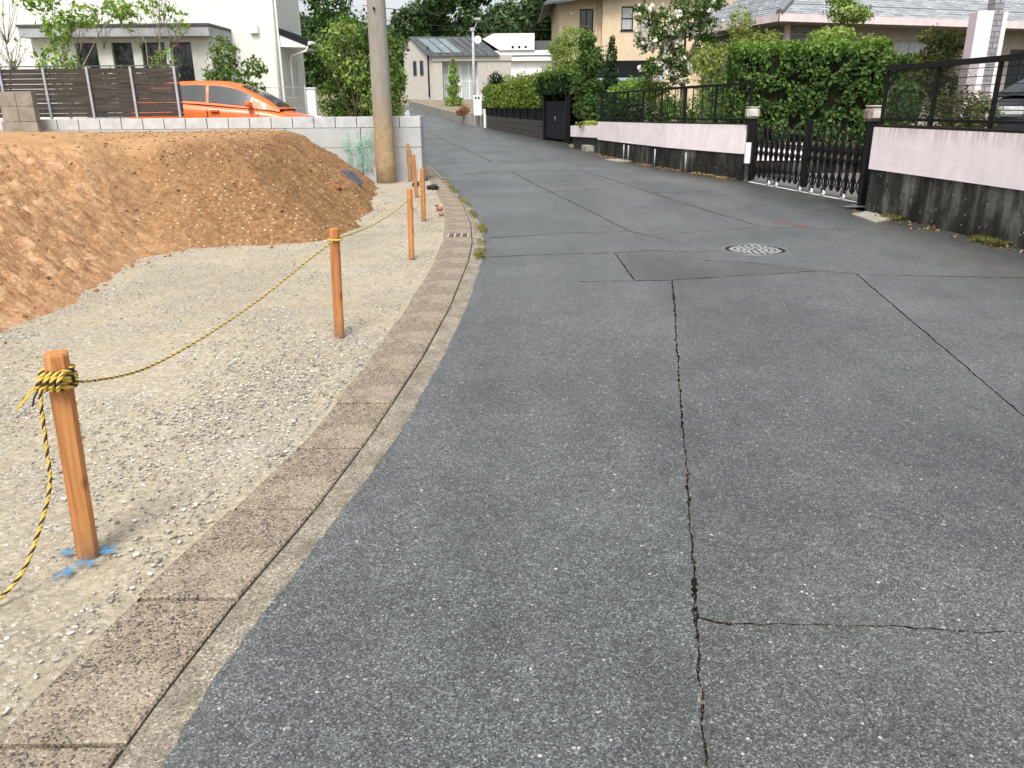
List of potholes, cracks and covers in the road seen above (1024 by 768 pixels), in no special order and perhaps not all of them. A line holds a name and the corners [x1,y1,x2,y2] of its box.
crack [671,280,1024,768]
manhole cover [722,244,789,255]
